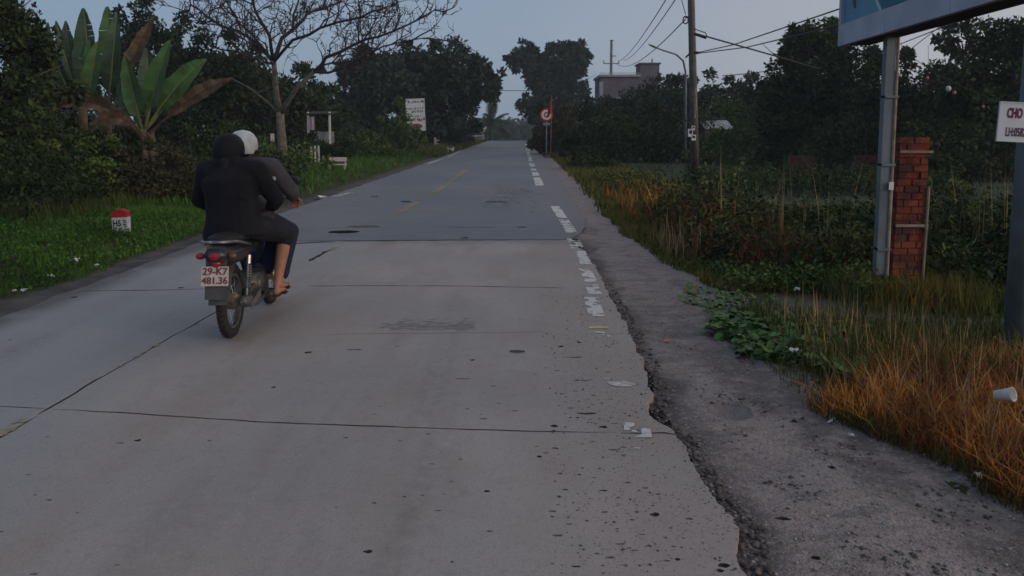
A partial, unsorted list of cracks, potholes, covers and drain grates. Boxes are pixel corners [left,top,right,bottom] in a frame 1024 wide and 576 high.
crack [203,242,330,261]
pothole [649,409,672,428]
